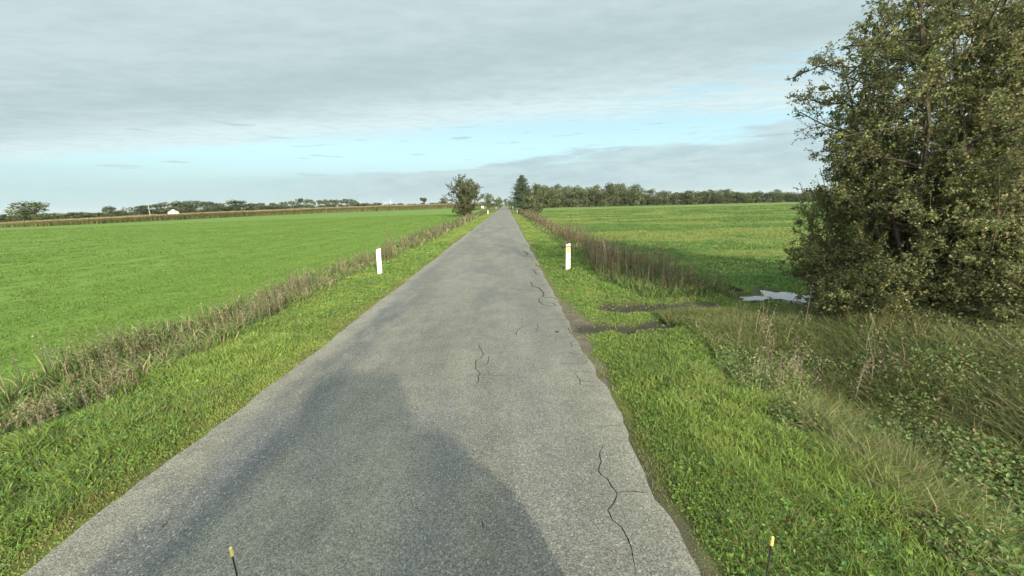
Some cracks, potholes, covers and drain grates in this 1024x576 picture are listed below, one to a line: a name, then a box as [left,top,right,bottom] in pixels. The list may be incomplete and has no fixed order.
crack [558,328,599,387]
crack [598,446,647,566]
crack [475,251,556,387]
